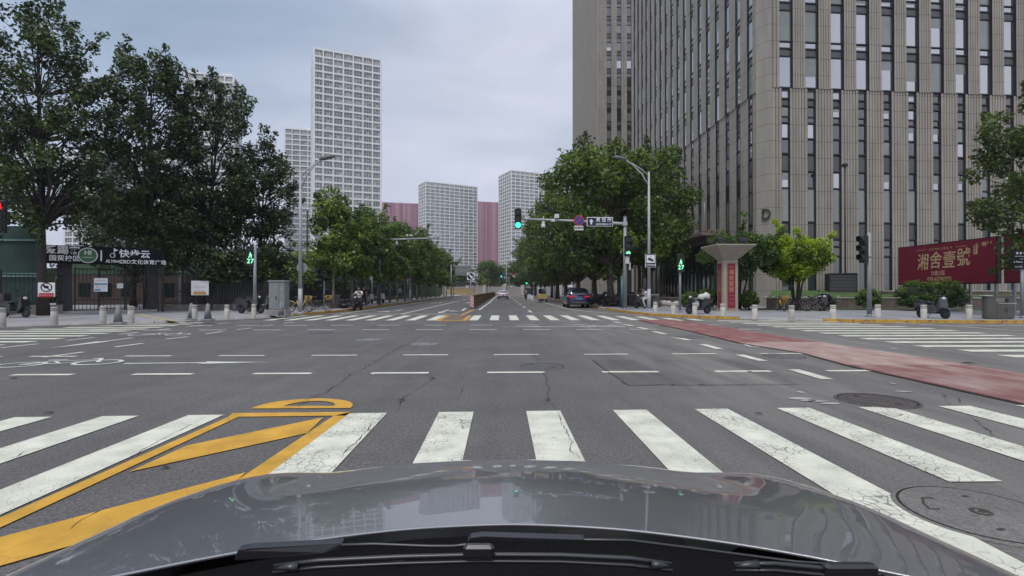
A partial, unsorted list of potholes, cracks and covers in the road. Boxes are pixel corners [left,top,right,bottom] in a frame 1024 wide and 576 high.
manhole cover [890,485,1024,548]
manhole cover [833,393,923,409]
